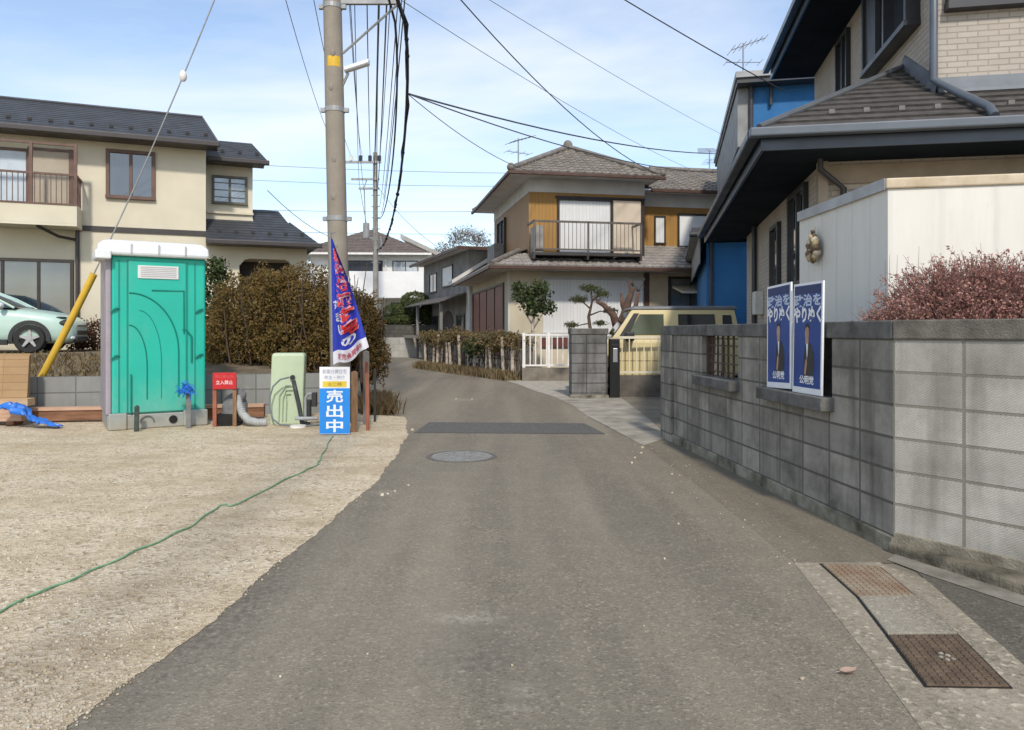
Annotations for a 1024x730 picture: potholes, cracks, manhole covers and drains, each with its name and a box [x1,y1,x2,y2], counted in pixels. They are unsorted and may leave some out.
manhole cover [426,450,497,463]
